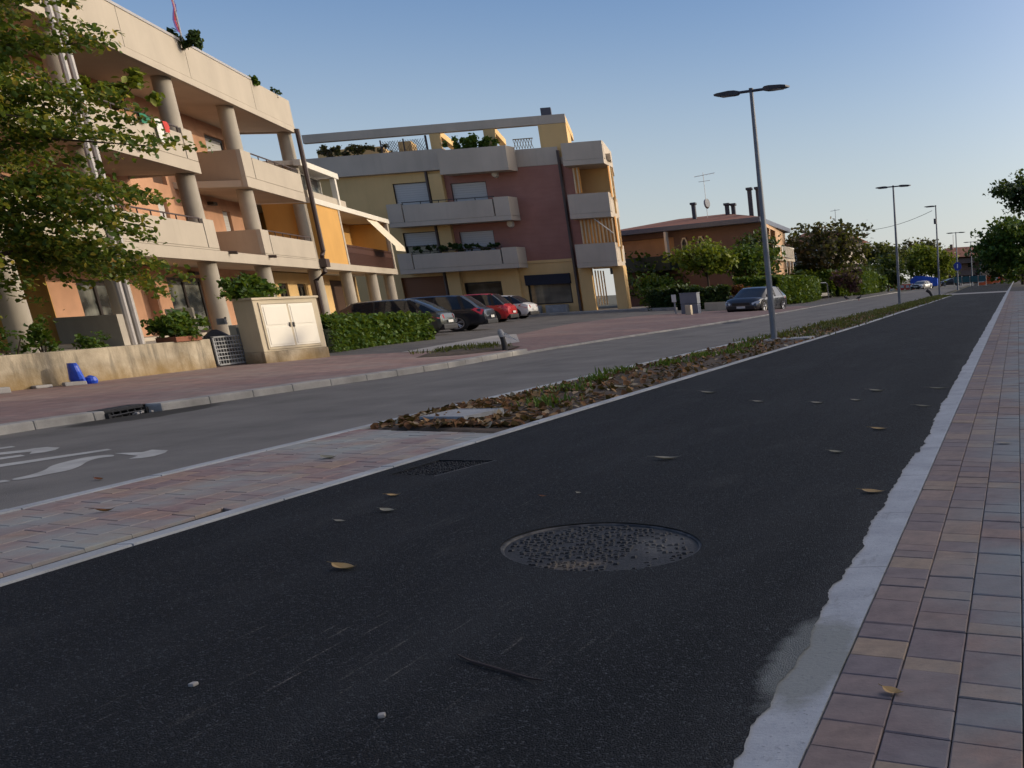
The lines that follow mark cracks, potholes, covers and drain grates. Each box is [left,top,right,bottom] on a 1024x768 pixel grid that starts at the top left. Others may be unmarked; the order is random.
manhole cover [419,408,504,420]
drain grate [87,404,154,419]
manhole cover [500,523,701,571]
